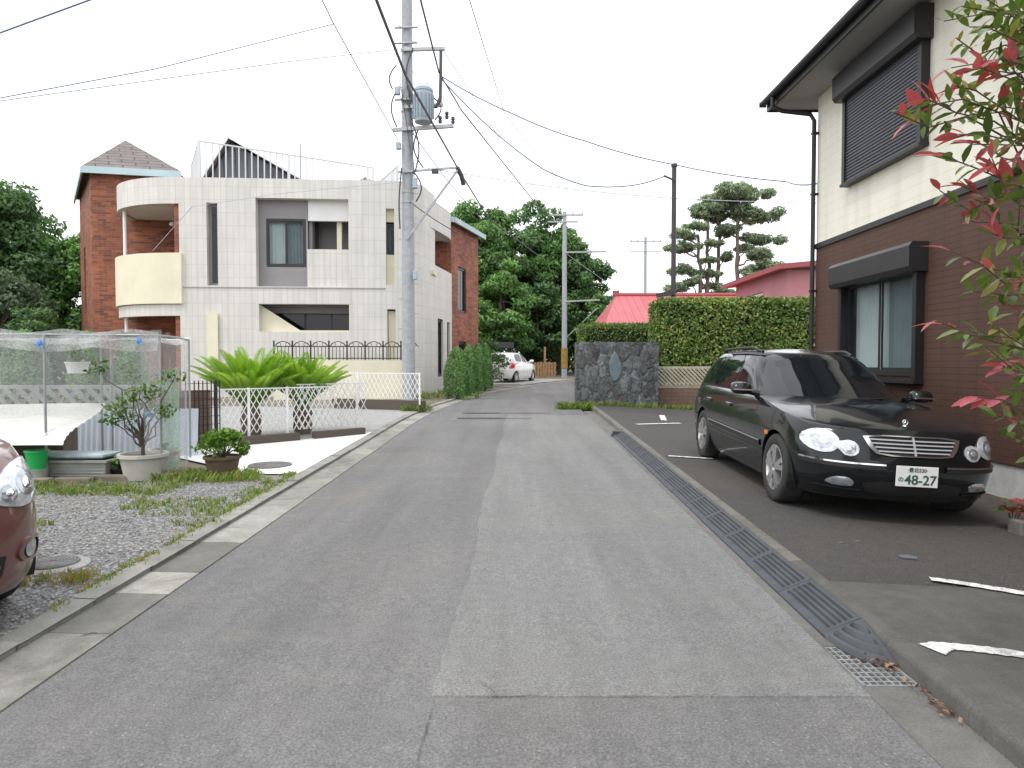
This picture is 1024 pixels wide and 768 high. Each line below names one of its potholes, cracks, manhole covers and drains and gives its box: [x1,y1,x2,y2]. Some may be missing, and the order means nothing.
drain grate [825,647,920,687]
manhole cover [27,555,91,577]
